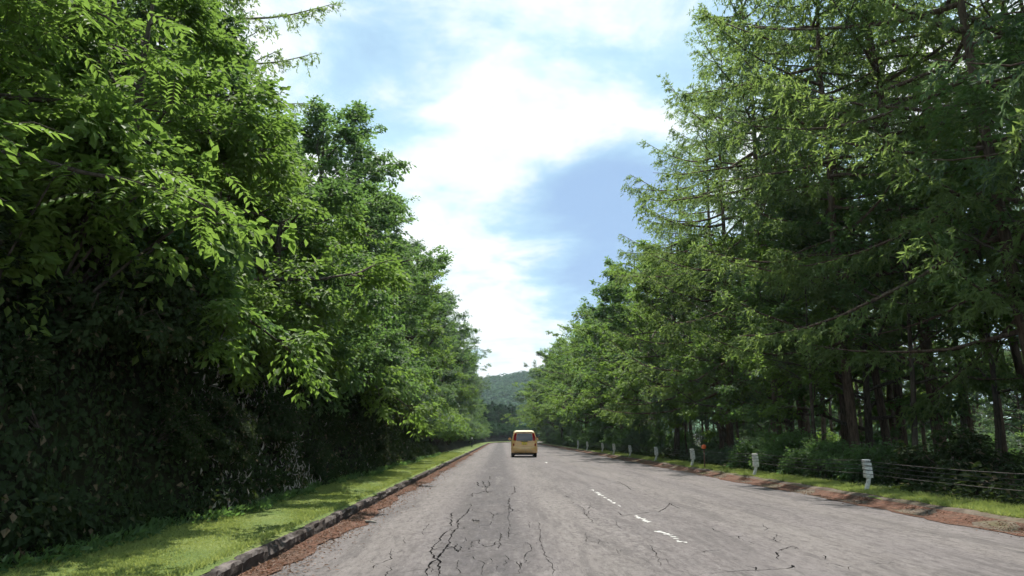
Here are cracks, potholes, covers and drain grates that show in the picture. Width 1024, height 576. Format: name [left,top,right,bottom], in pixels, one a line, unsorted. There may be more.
crack [703,526,797,575]
crack [371,476,556,576]
crack [573,502,680,564]
